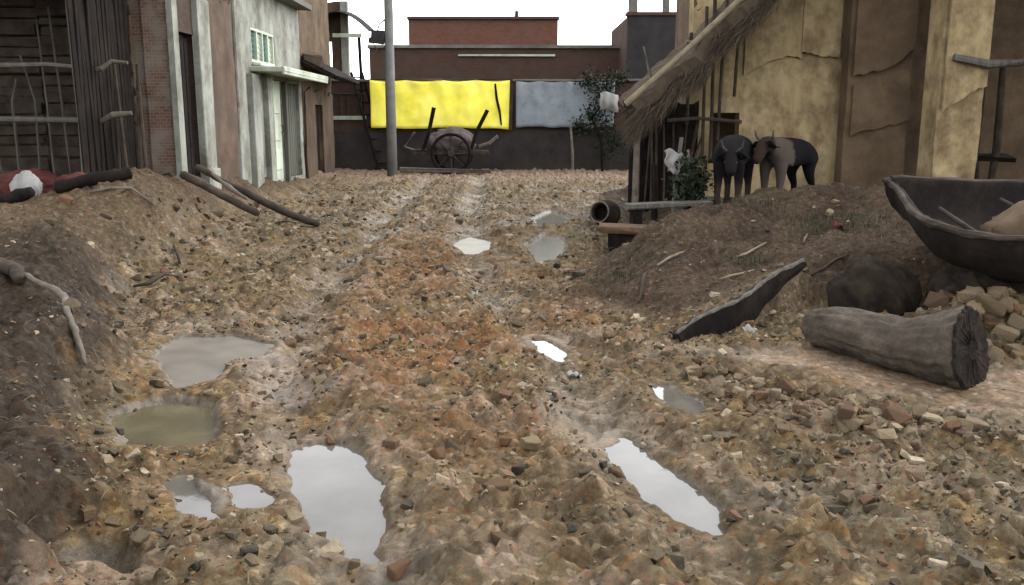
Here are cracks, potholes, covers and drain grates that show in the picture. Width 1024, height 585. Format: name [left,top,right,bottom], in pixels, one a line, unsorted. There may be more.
pothole [141,461,236,528]
pothole [637,376,727,418]
pothole [89,388,239,452]
pothole [267,431,411,574]
pothole [517,334,581,367]
pothole [518,229,572,264]
pothole [446,235,499,256]
pothole [203,470,286,516]
pothole [584,429,751,547]
pothole [526,207,579,226]
pothole [139,327,287,390]
